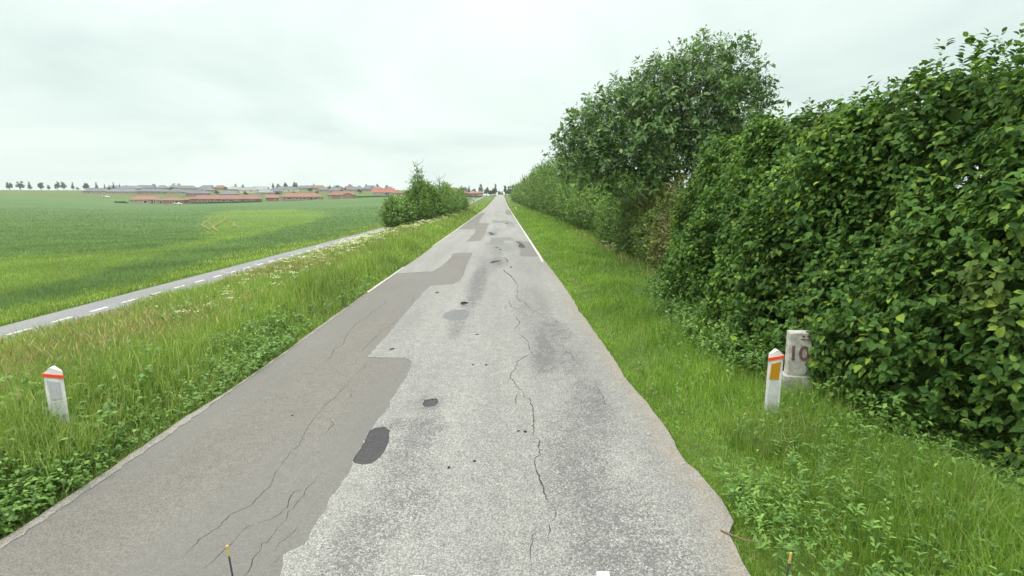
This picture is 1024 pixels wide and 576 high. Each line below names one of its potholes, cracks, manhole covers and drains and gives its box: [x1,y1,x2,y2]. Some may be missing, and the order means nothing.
crack [180,302,392,576]
crack [504,255,558,576]
